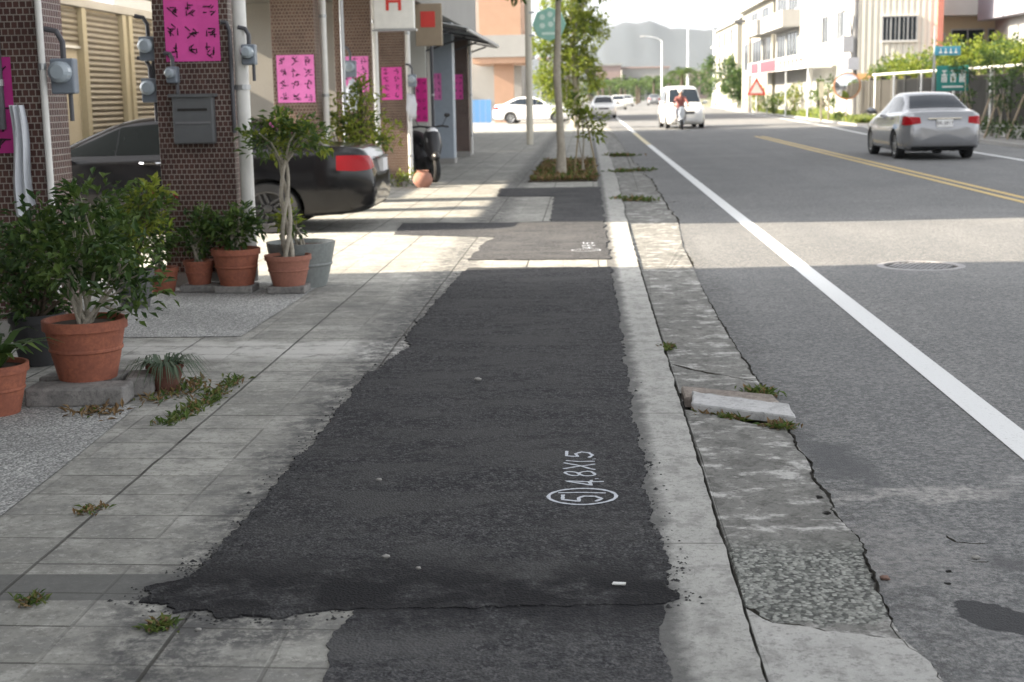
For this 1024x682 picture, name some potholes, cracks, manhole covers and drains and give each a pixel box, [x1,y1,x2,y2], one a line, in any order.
manhole cover [877,261,966,271]
crack [701,286,939,677]
crack [673,364,719,375]
